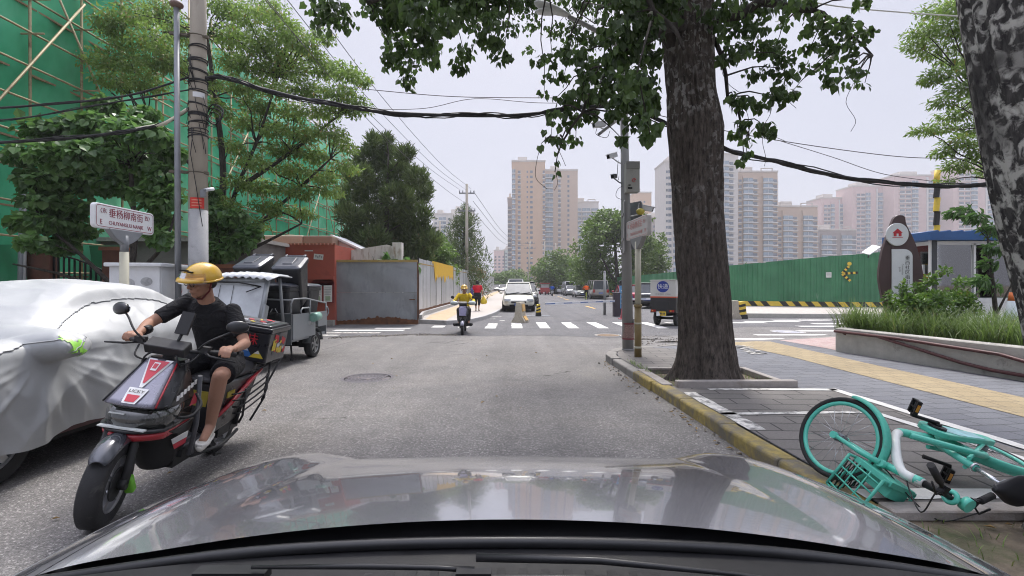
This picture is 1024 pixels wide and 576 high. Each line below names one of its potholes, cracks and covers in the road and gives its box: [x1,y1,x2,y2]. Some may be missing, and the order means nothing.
manhole cover [340,373,394,383]
